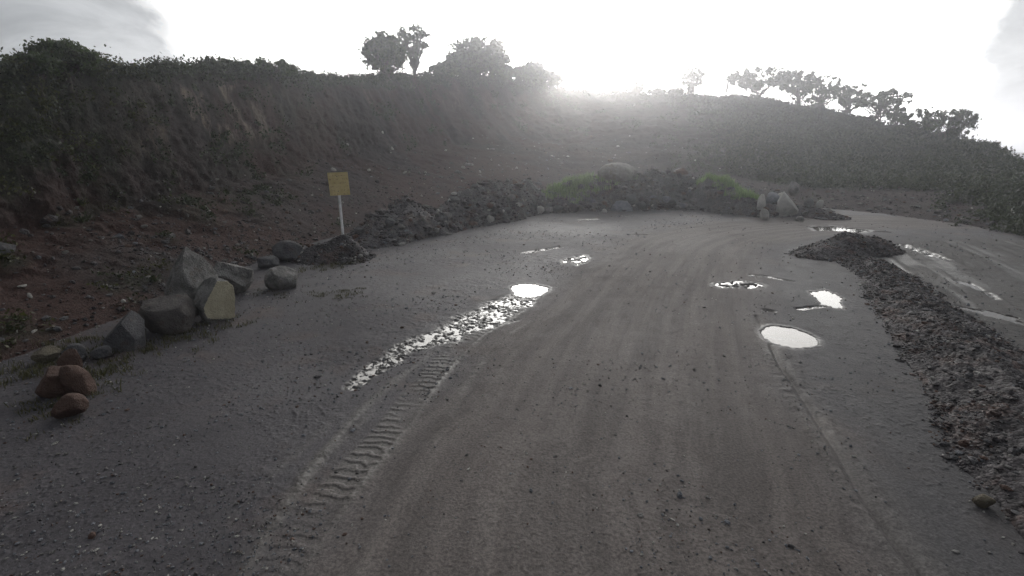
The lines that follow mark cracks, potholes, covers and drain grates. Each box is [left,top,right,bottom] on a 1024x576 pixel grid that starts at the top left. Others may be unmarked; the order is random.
pothole [807,289,845,310]
pothole [560,255,590,266]
pothole [508,282,552,299]
pothole [711,280,767,289]
pothole [758,324,824,349]
